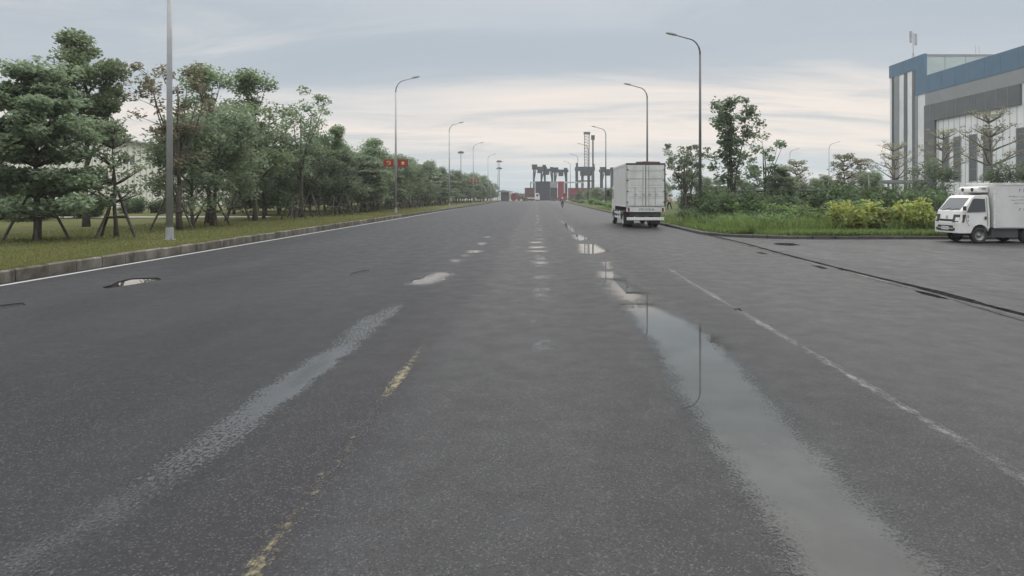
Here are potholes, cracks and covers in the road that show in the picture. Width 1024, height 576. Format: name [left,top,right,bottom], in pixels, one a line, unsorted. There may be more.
pothole [103,278,161,288]
